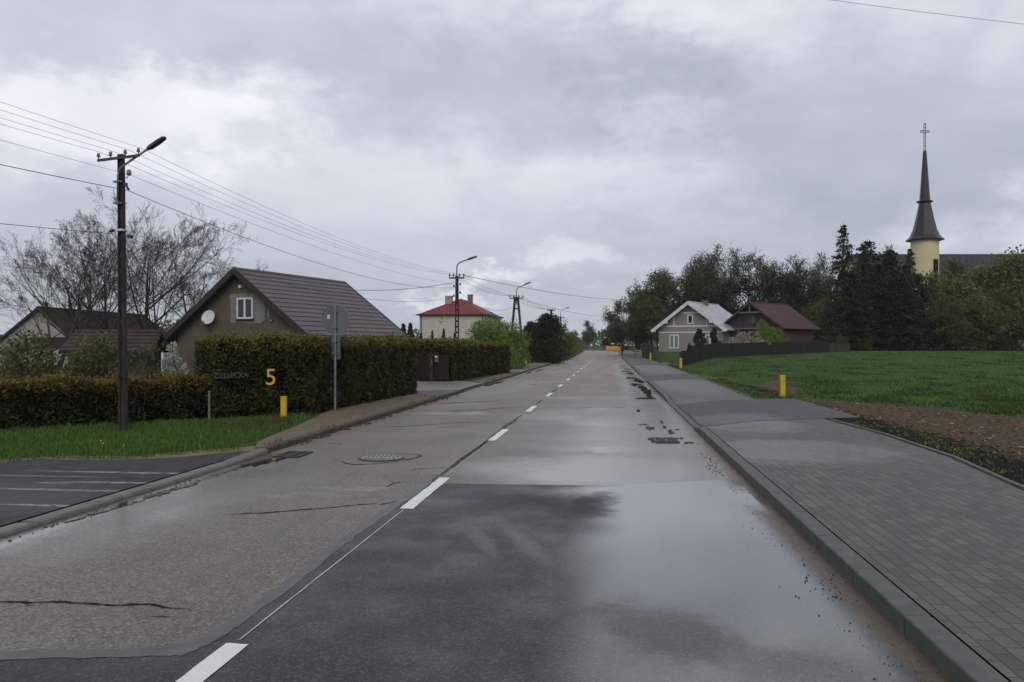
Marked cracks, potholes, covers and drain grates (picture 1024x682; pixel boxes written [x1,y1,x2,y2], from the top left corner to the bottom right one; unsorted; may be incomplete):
crack [226,453,425,515]
crack [0,599,205,617]
